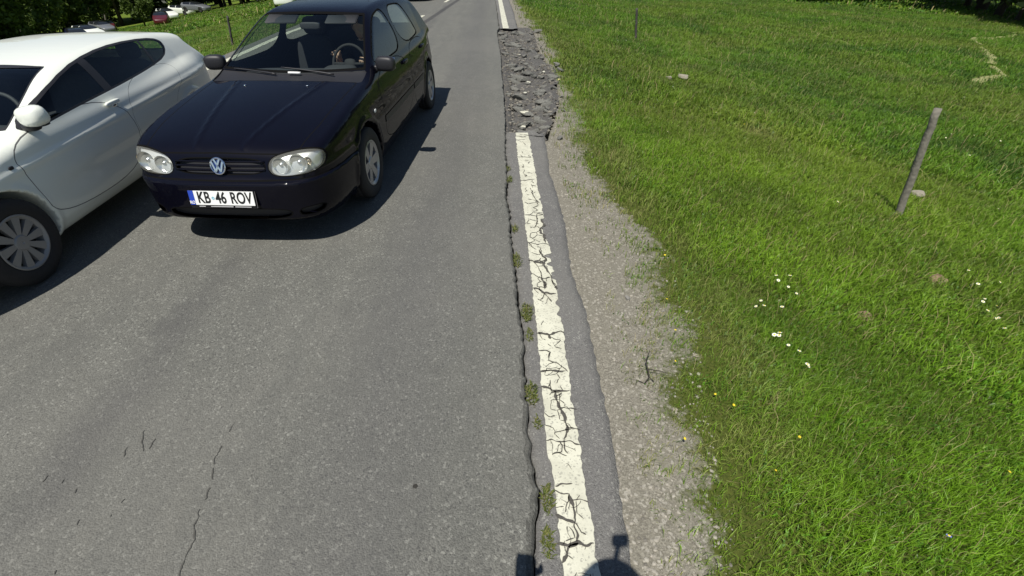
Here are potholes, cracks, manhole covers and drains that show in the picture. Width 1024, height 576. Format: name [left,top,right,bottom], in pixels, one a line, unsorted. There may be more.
pothole [498,28,564,140]
crack [178,422,235,576]
crack [505,134,593,576]
